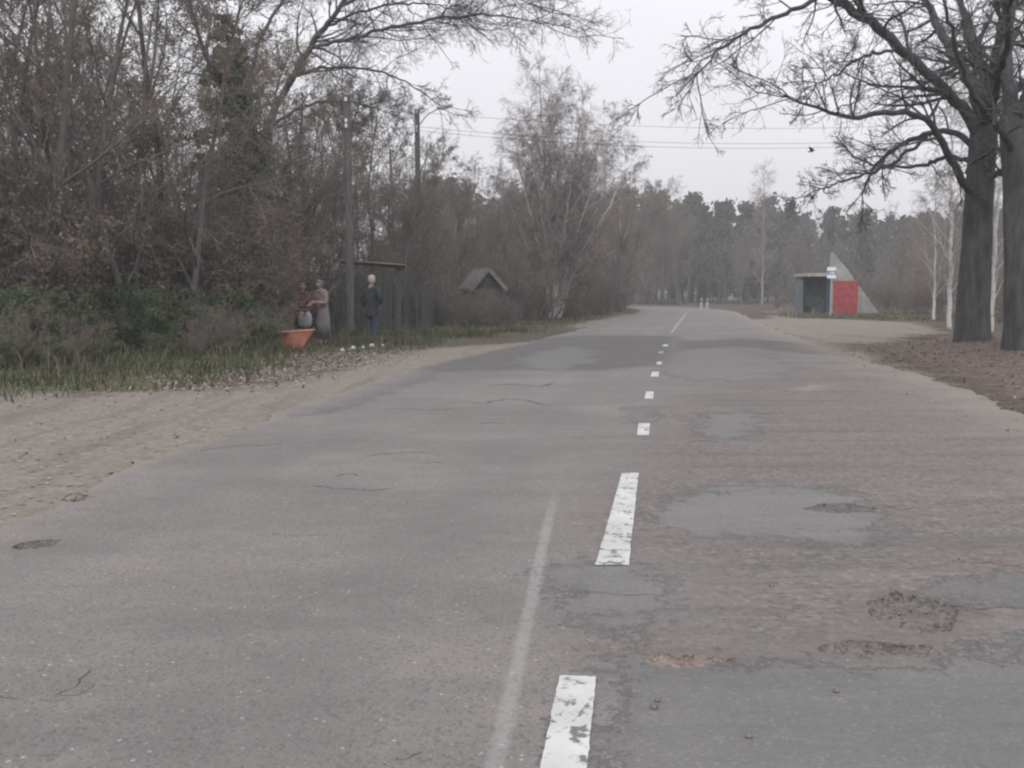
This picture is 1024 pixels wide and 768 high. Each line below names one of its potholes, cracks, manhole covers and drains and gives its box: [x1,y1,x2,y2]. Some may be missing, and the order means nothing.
pothole [804,502,879,513]
pothole [11,539,61,550]
pothole [816,640,940,658]
crack [303,473,397,491]
crack [201,442,282,452]
pothole [860,589,965,634]
crack [469,383,555,406]
crack [0,668,98,701]
pothole [644,654,738,668]
